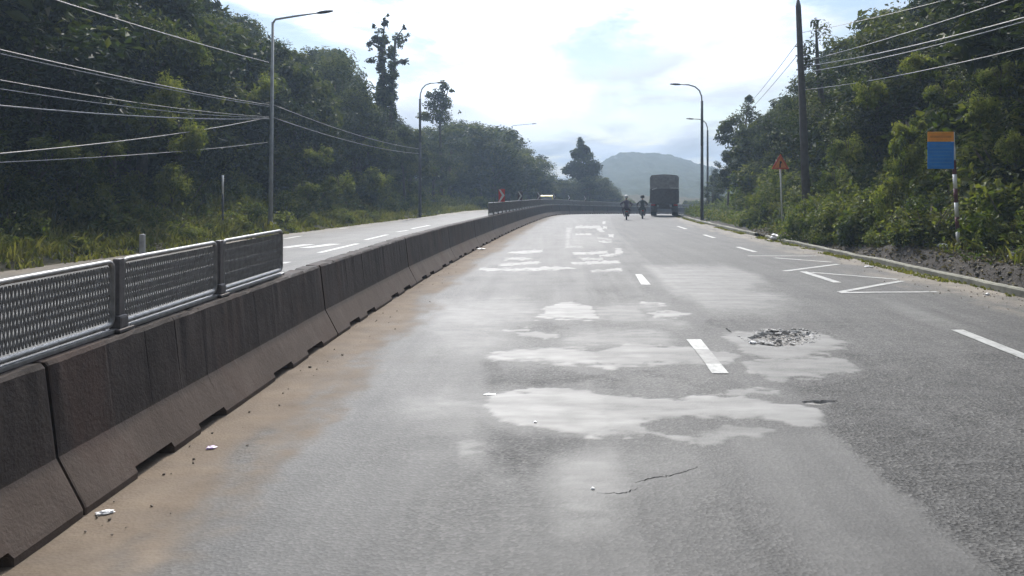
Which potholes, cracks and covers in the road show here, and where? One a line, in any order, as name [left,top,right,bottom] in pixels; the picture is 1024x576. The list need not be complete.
pothole [737,328,820,347]
crack [606,467,697,494]
